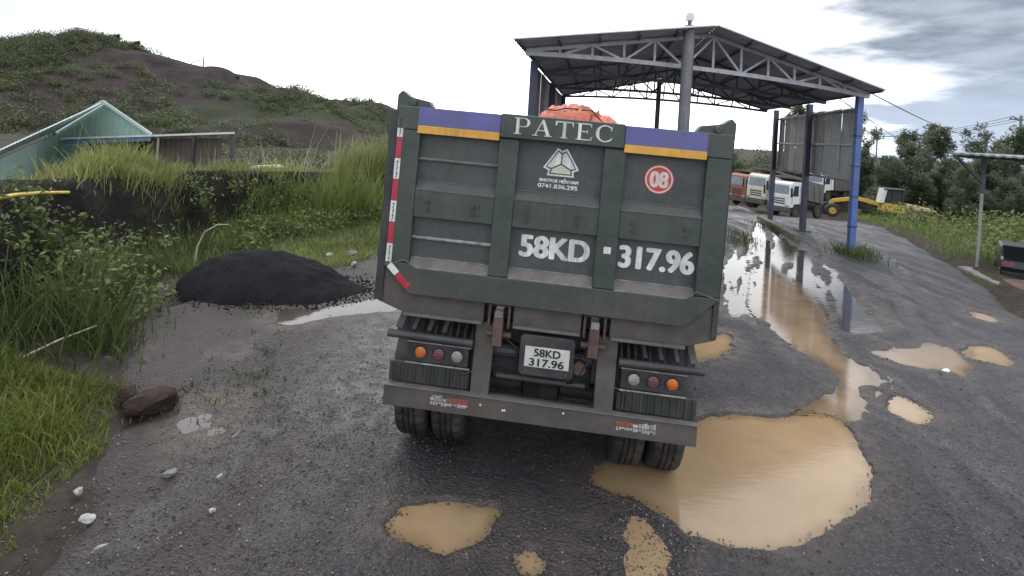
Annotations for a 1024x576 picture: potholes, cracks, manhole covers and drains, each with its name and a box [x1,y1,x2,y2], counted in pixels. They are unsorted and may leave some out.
pothole [499,538,564,576]
pothole [953,342,1024,371]
pothole [694,330,744,364]
pothole [371,491,514,570]
pothole [962,308,1009,325]
pothole [577,408,889,560]
pothole [745,265,896,438]
pothole [858,385,948,430]
